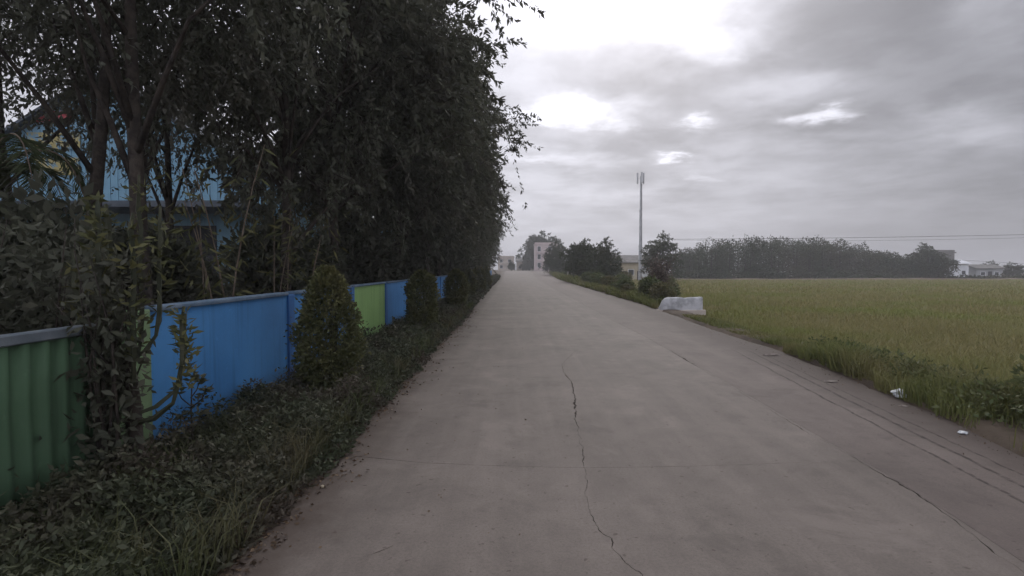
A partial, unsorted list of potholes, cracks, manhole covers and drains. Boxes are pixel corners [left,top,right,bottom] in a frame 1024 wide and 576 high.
crack [358,351,798,576]
